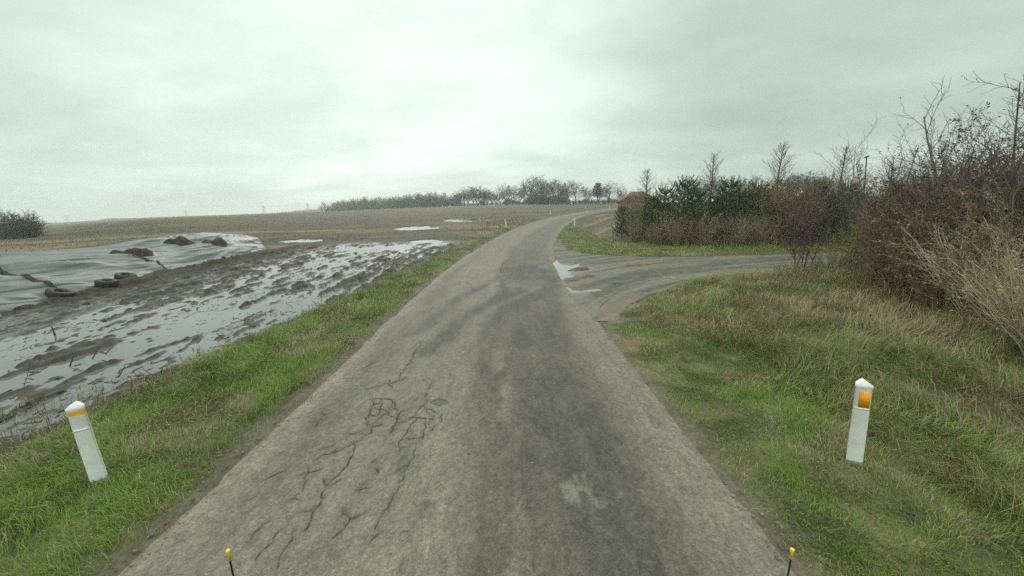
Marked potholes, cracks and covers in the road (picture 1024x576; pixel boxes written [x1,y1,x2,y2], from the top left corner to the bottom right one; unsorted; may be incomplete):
crack [250,347,442,569]
